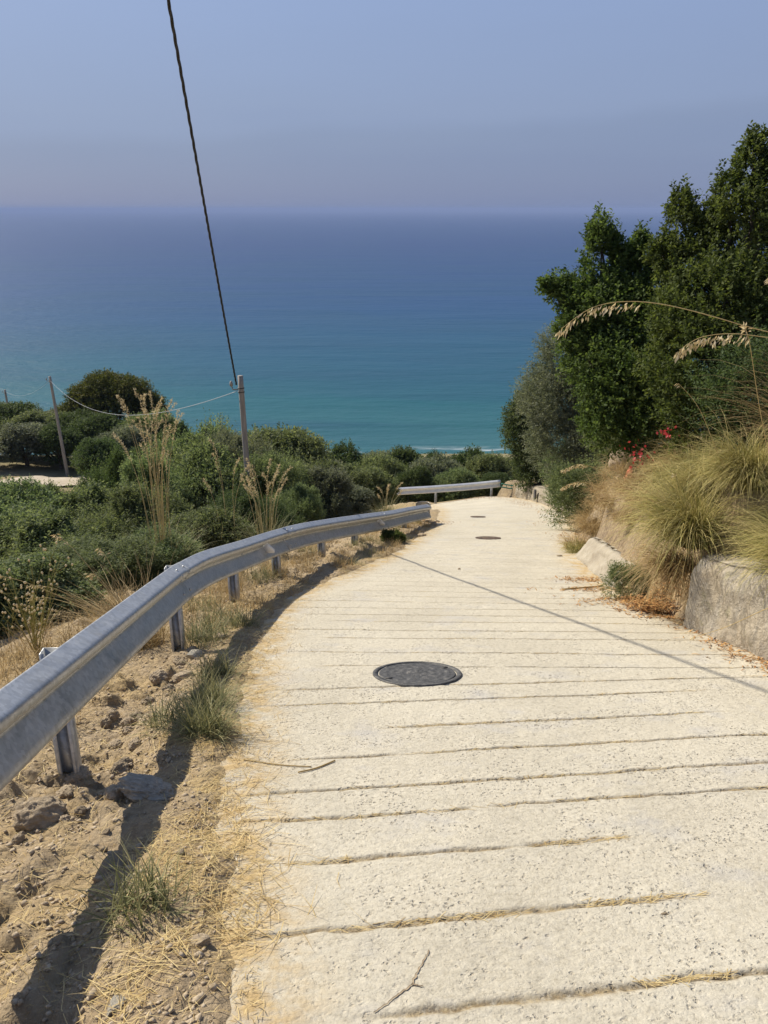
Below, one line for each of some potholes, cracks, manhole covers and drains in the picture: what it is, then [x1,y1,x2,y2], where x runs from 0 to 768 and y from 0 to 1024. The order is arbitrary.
manhole cover [373,661,462,687]
